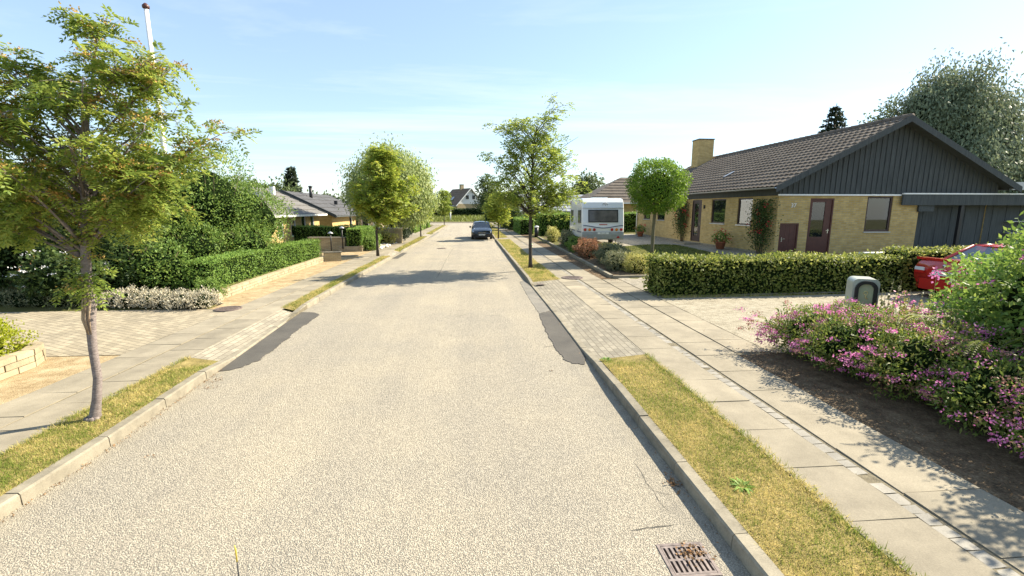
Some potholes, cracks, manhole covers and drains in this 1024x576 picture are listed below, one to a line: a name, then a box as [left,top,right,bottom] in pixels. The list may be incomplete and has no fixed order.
drain grate [656,542,723,576]
crack [631,463,674,531]
